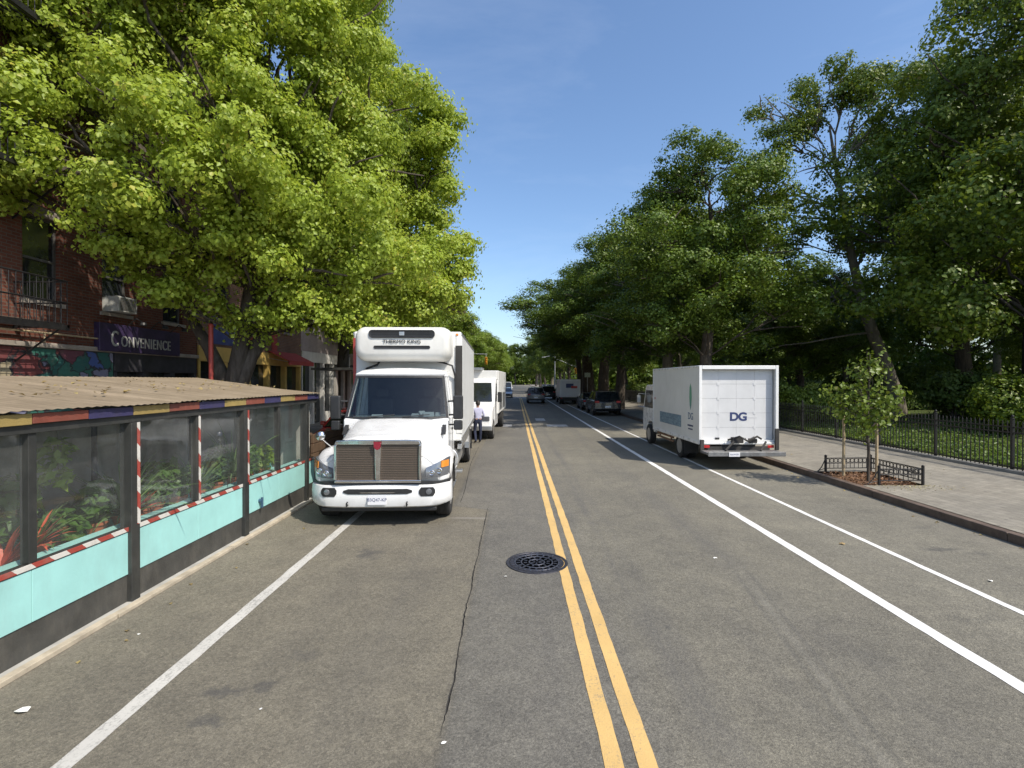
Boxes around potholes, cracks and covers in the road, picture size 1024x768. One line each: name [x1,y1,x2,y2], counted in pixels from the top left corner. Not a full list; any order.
manhole cover [506,552,568,574]
crack [439,508,488,737]
